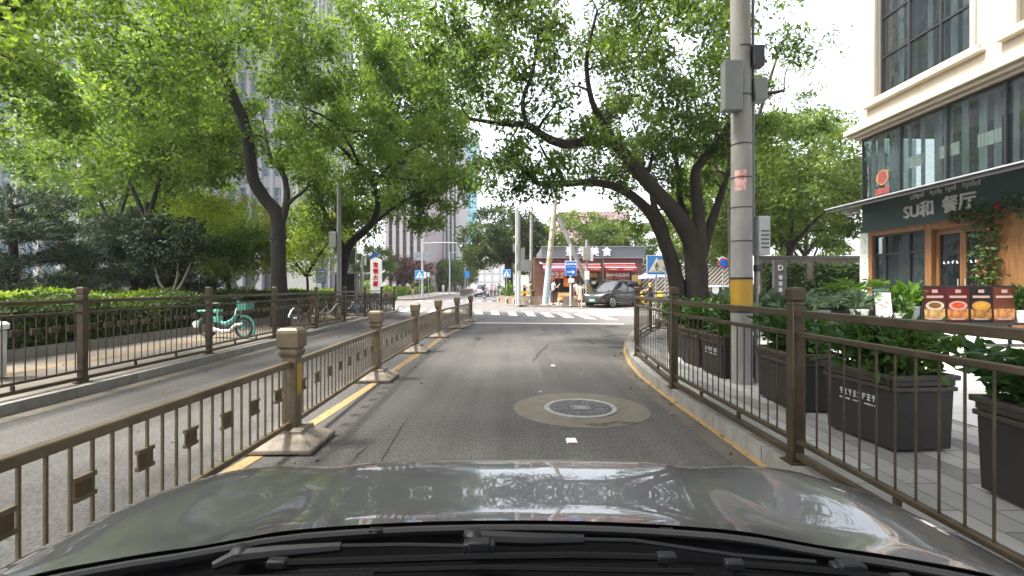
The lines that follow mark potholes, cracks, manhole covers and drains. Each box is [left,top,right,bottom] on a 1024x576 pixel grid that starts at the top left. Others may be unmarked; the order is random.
manhole cover [514,393,651,428]
crack [351,420,407,462]
